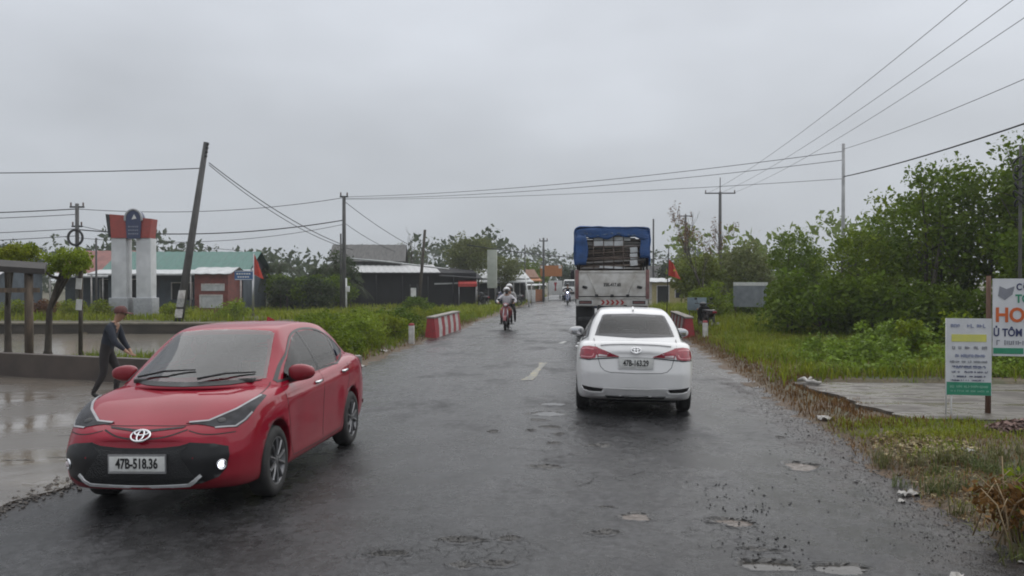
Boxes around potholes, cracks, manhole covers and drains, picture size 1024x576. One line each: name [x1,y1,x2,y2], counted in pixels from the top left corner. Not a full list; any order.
pothole [780,460,824,472]
pothole [362,549,414,558]
pothole [478,558,521,569]
pothole [805,562,877,576]
pothole [495,534,524,543]
pothole [442,559,484,571]
pothole [583,527,626,537]
pothole [615,510,655,522]
pothole [433,535,492,545]
pothole [702,515,760,529]
pothole [731,557,807,572]
